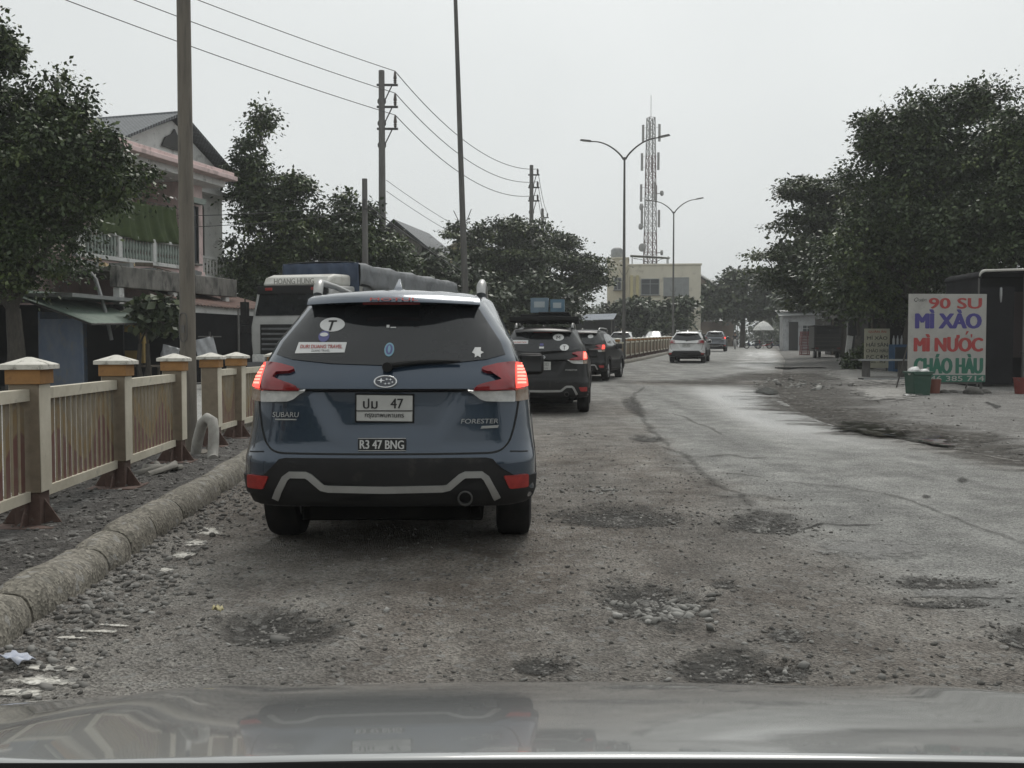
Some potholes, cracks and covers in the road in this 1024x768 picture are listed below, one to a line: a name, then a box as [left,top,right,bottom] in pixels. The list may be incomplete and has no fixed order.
pothole [601,586,699,630]
pothole [674,648,764,683]
pothole [226,612,336,646]
pothole [761,666,807,682]
pothole [905,600,981,608]
pothole [552,505,677,528]
pothole [515,661,559,674]
crack [796,523,876,531]
pothole [904,577,991,588]
pothole [722,510,794,534]
